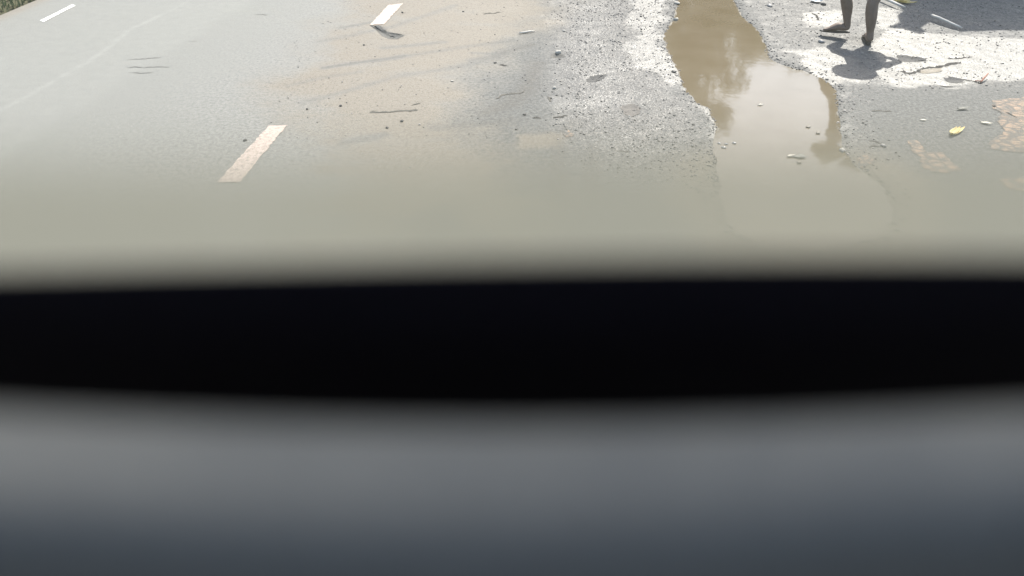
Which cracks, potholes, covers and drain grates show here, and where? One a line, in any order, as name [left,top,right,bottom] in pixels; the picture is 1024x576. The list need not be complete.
crack [128,57,165,73]
